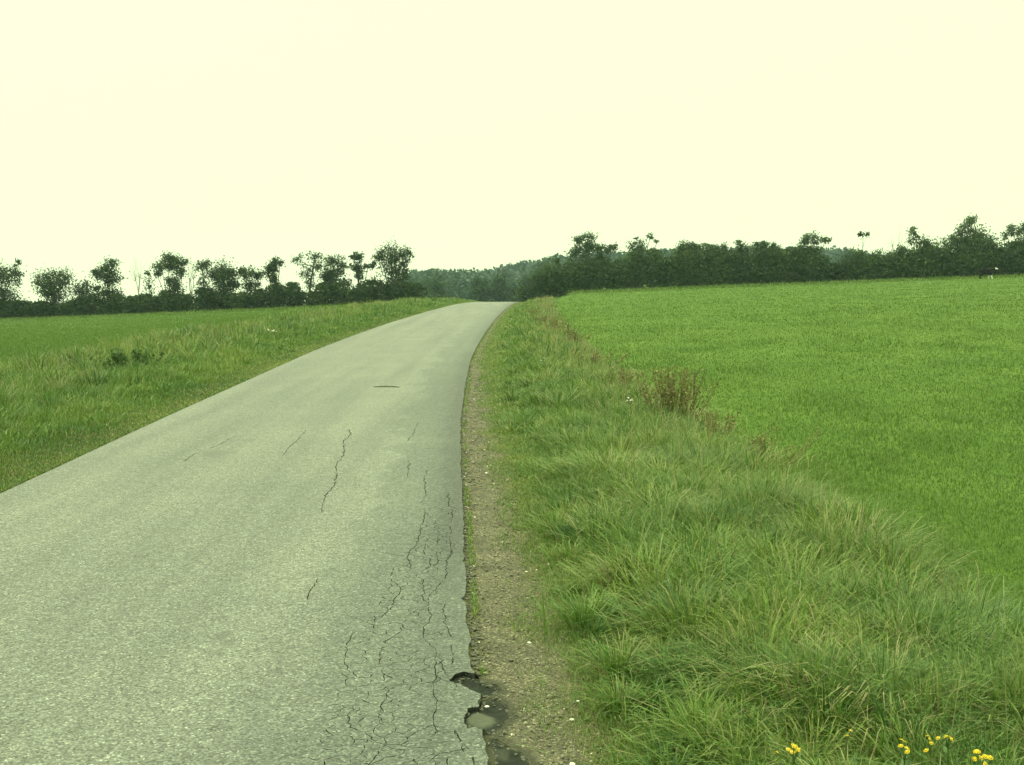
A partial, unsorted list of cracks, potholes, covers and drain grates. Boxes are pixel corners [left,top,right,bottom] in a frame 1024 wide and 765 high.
pothole [464,698,510,737]
pothole [450,671,502,699]
crack [321,430,351,513]
pothole [489,739,532,765]
crack [310,463,474,765]
